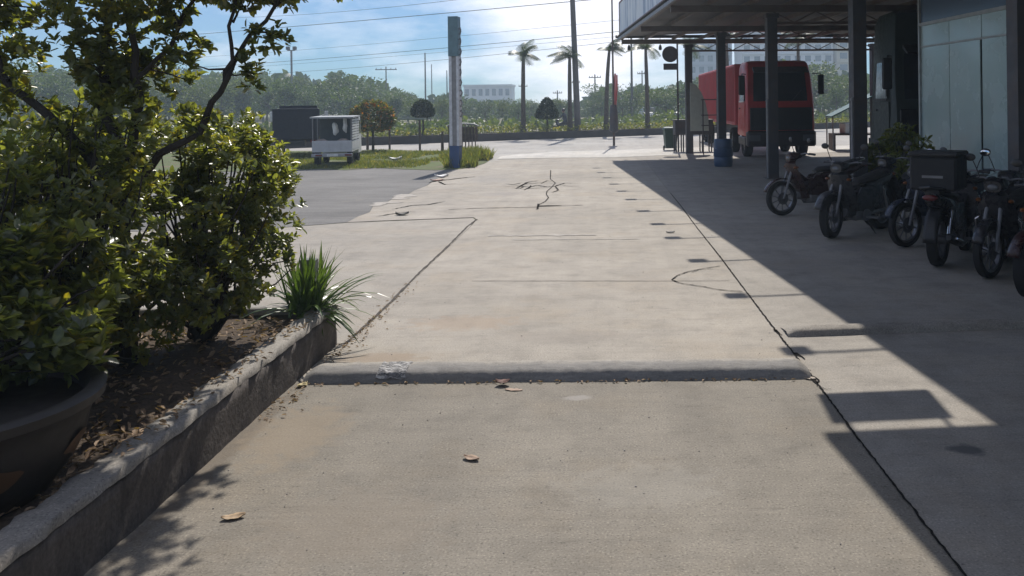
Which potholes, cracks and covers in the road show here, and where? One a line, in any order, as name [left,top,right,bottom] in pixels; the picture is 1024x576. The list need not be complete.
crack [507,170,578,209]
crack [671,194,967,576]
